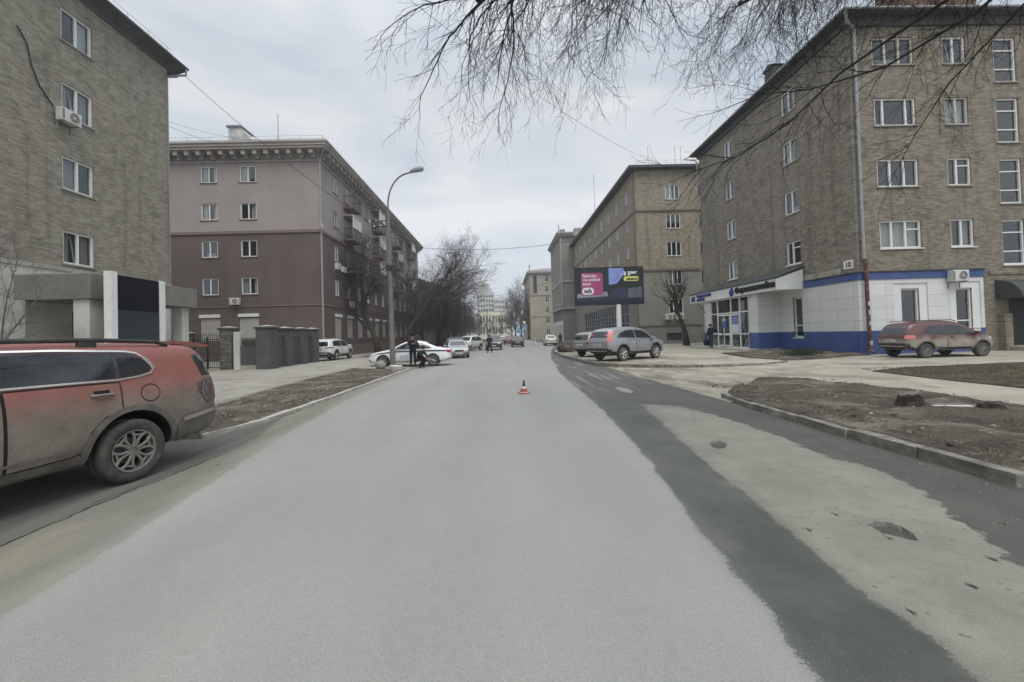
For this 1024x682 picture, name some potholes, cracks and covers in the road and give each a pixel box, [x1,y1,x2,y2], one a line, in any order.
pothole [707,441,729,449]
pothole [865,521,920,541]
